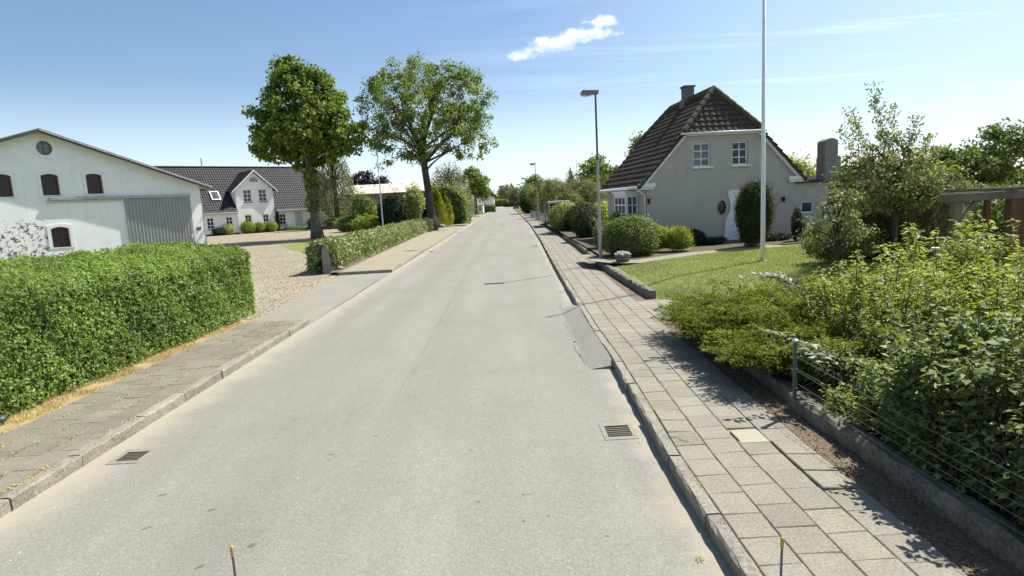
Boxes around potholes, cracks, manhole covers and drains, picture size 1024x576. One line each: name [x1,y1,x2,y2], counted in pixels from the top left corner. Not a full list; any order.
drain grate [598,422,639,441]
drain grate [105,448,158,465]
